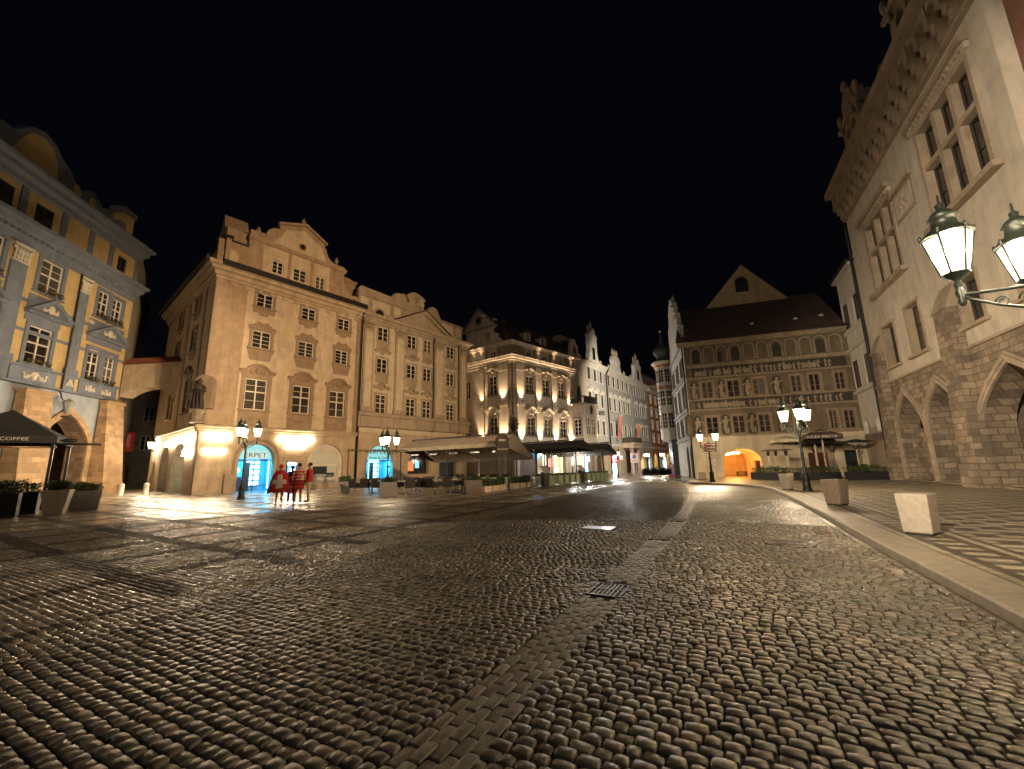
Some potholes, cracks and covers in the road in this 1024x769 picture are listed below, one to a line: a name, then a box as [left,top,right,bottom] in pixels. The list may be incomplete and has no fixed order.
drain grate [585,582,631,599]
